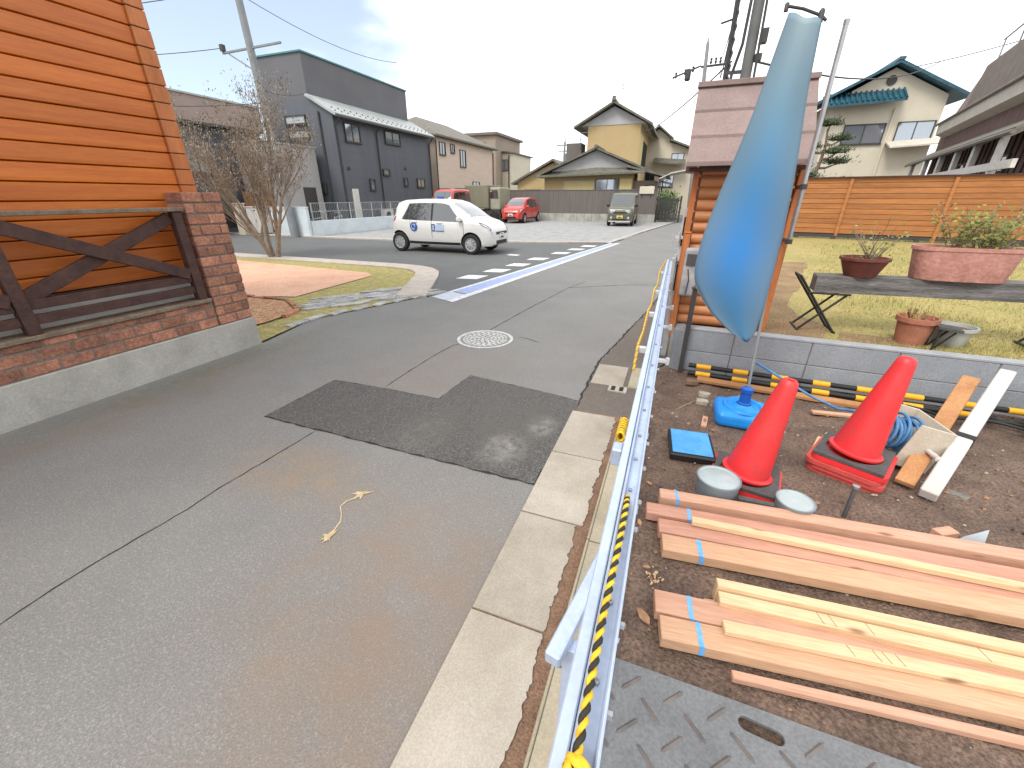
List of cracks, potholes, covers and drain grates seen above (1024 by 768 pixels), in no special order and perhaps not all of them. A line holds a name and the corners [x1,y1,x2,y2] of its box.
crack [579,297,658,401]
manhole cover [457,330,513,349]
